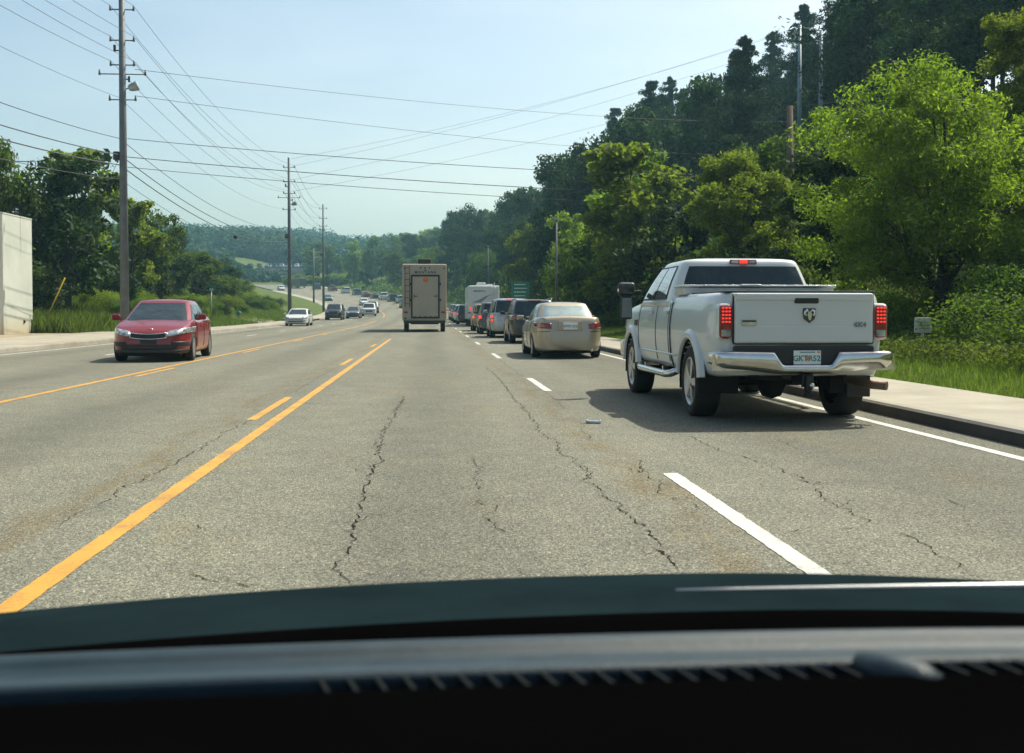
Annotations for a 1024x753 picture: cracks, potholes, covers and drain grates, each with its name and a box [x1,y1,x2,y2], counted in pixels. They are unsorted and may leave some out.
crack [61,420,249,524]
crack [324,396,405,583]
crack [487,367,683,571]
crack [473,459,525,544]
crack [691,436,871,531]
